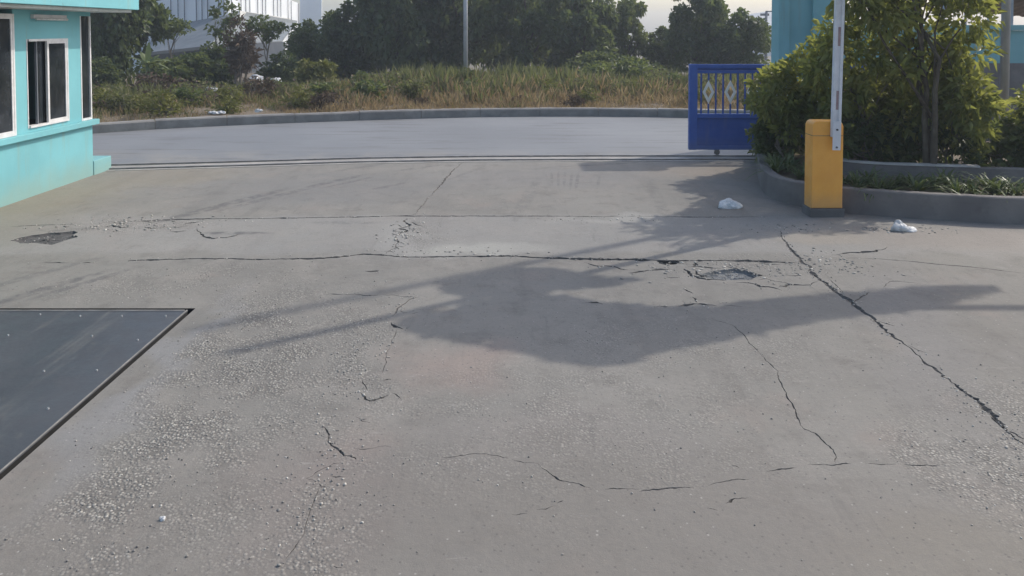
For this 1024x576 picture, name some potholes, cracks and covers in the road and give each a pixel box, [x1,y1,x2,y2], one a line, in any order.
crack [286,261,986,568]
crack [415,162,464,214]
pothole [698,269,760,280]
crack [836,247,1011,272]
pothole [11,231,78,245]
crack [106,221,238,239]
